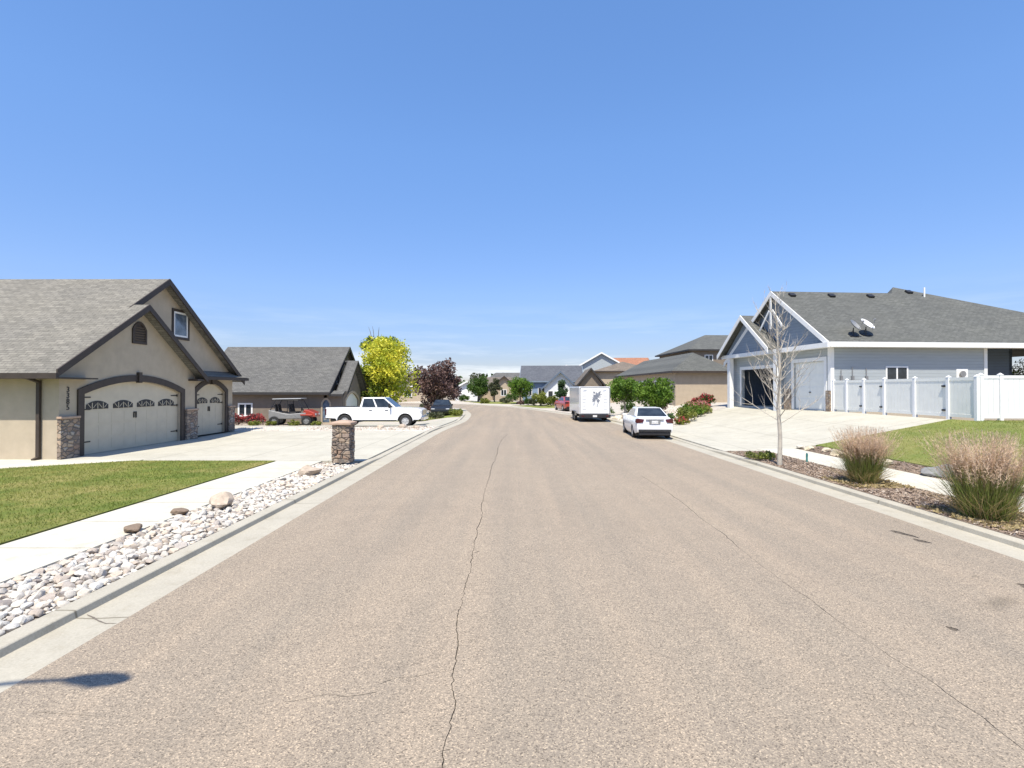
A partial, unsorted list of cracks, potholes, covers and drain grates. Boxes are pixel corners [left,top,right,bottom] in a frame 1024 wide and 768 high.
crack [284,440,502,768]
